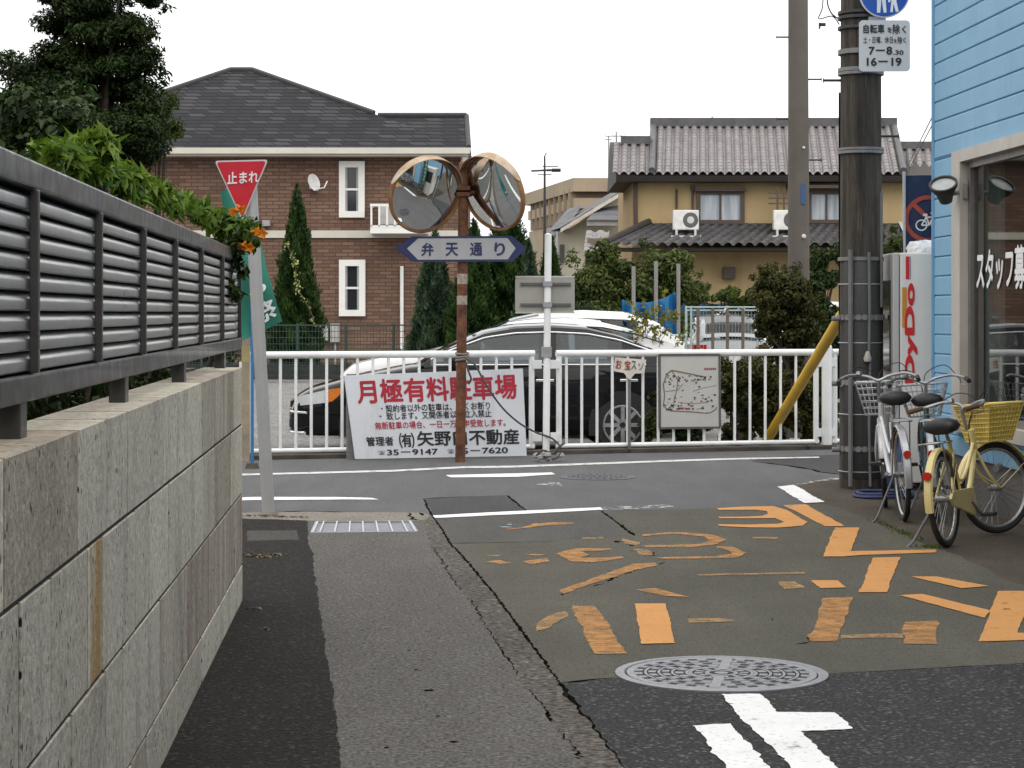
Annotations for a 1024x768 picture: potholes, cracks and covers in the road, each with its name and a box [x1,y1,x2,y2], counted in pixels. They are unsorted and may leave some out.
crack [431,547,586,759]
manhole cover [615,656,829,693]
crack [759,462,839,475]
crack [560,511,665,595]
drain grate [310,521,418,533]
crack [408,496,473,520]
